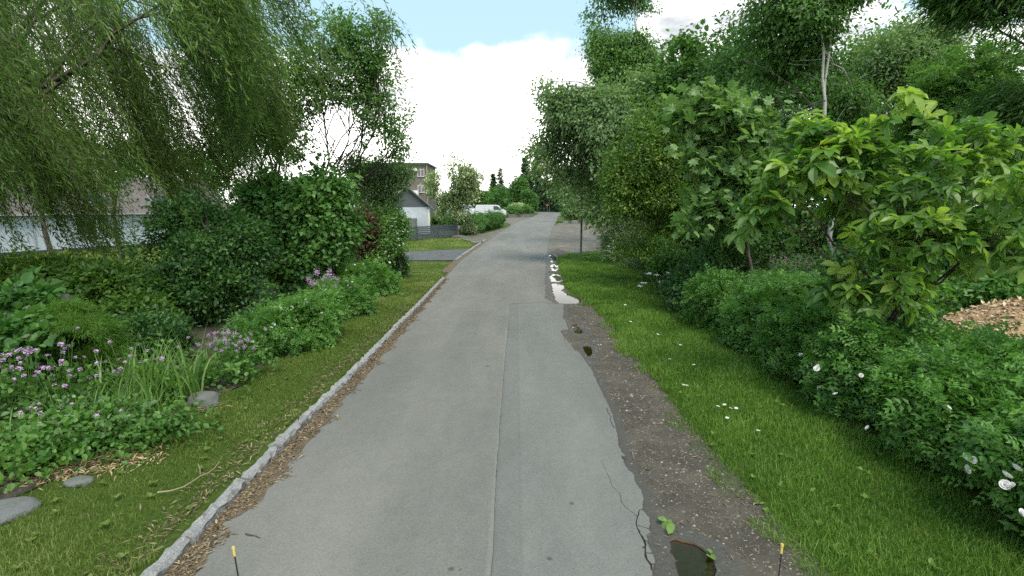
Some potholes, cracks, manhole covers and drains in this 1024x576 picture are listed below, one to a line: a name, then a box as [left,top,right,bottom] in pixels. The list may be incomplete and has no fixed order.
pothole [551,283,583,304]
pothole [669,538,717,576]
crack [601,461,655,570]
